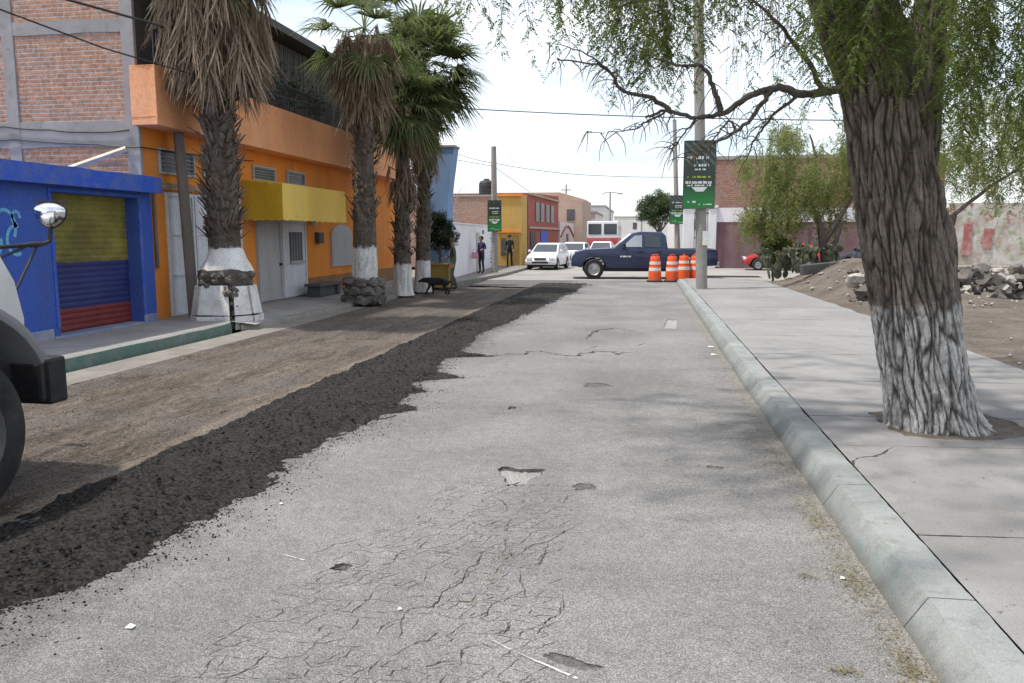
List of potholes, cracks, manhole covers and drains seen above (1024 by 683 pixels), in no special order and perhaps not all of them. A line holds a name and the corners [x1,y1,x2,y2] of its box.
pothole [543,652,604,671]
pothole [497,467,546,487]
crack [852,449,889,467]
pothole [572,483,597,491]
crack [492,328,645,356]
crack [160,482,608,683]
